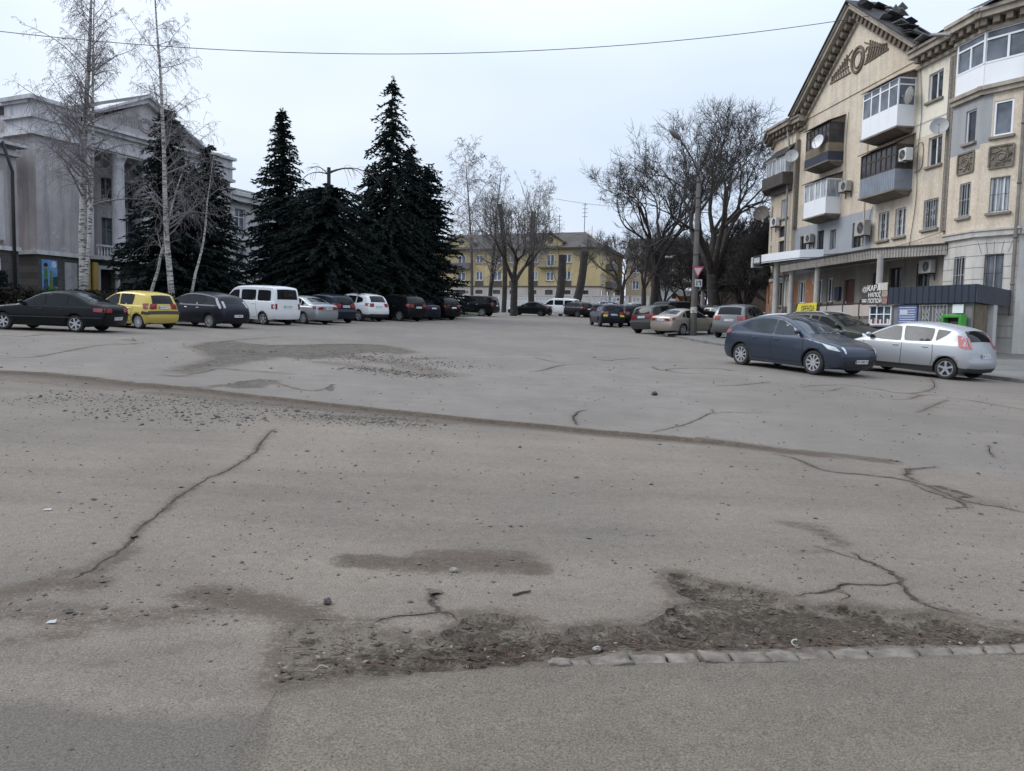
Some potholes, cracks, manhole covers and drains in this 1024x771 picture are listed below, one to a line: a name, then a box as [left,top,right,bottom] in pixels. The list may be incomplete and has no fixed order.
crack [781,398,1021,512]
pothole [275,572,1024,685]
crack [313,589,459,624]
crack [74,429,275,578]
crack [795,547,954,613]
